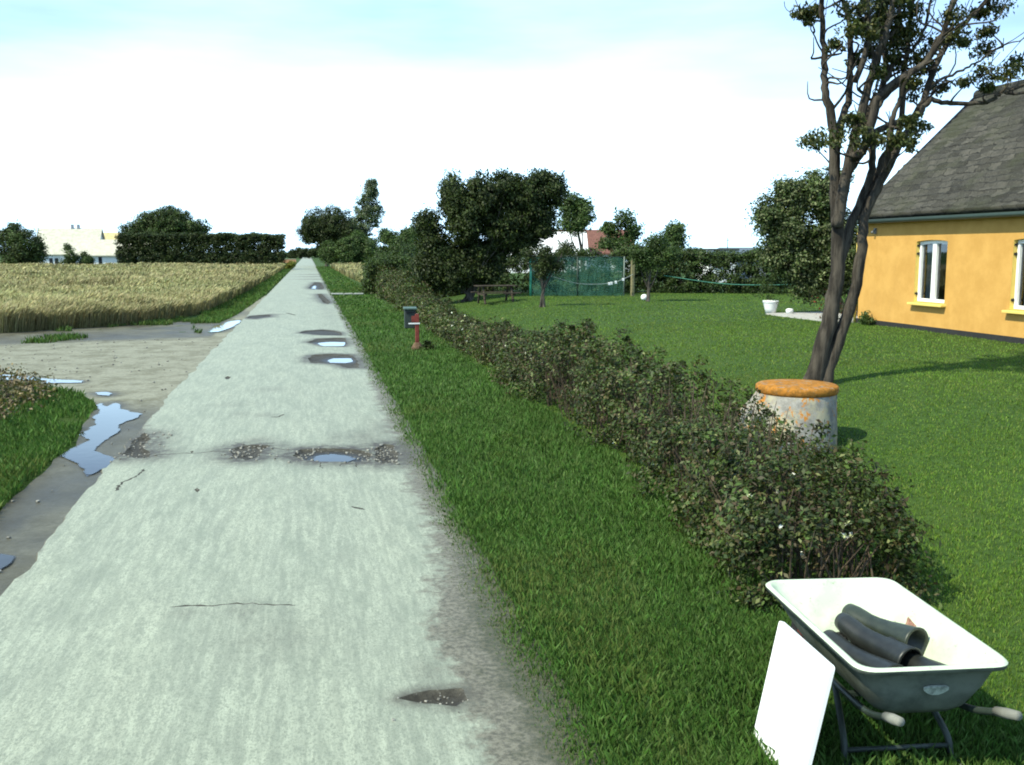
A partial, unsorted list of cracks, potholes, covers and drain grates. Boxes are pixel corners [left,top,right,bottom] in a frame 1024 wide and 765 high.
pothole [221,443,278,461]
pothole [309,338,348,347]
pothole [392,688,469,721]
pothole [308,354,360,368]
pothole [287,446,380,463]
crack [115,451,213,491]
